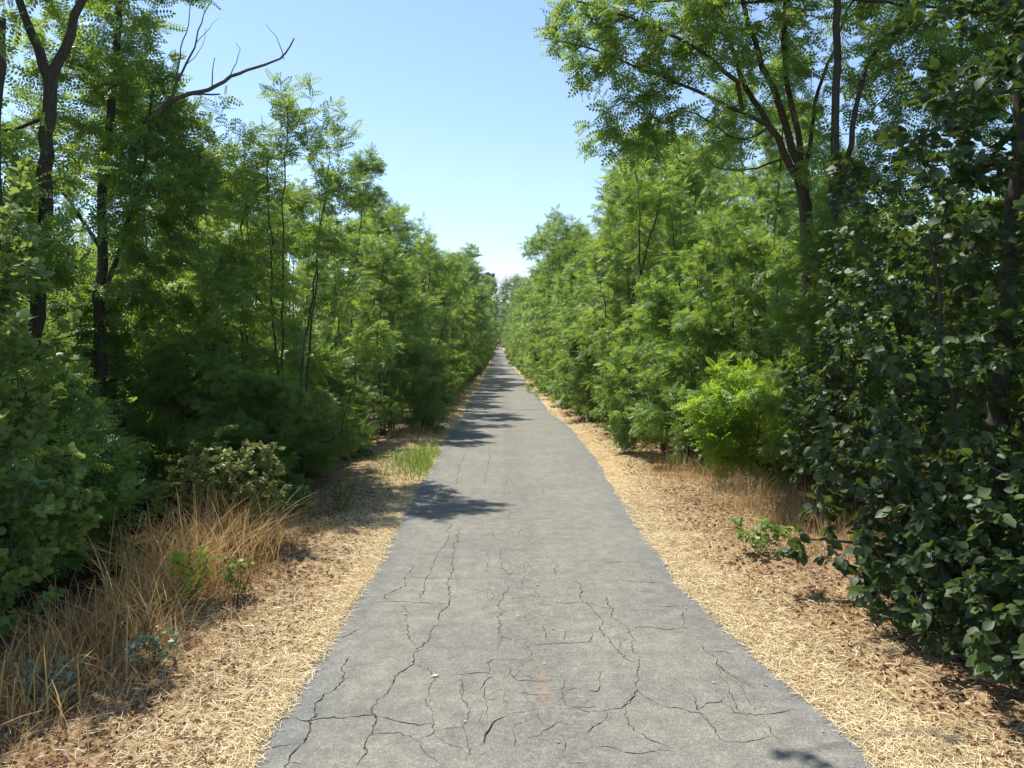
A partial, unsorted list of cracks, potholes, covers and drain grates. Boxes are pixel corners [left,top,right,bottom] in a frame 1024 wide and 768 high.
crack [266,480,793,768]
